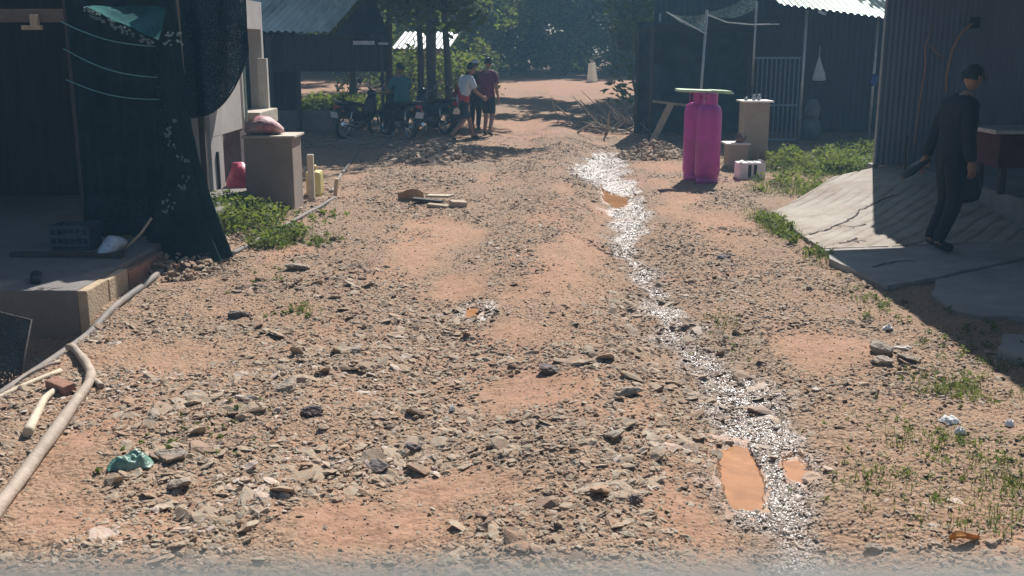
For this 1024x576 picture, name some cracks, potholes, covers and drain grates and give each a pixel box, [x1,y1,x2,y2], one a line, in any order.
crack [809,195,894,243]
pothole [778,449,814,491]
pothole [707,433,772,522]
pothole [597,181,633,211]
